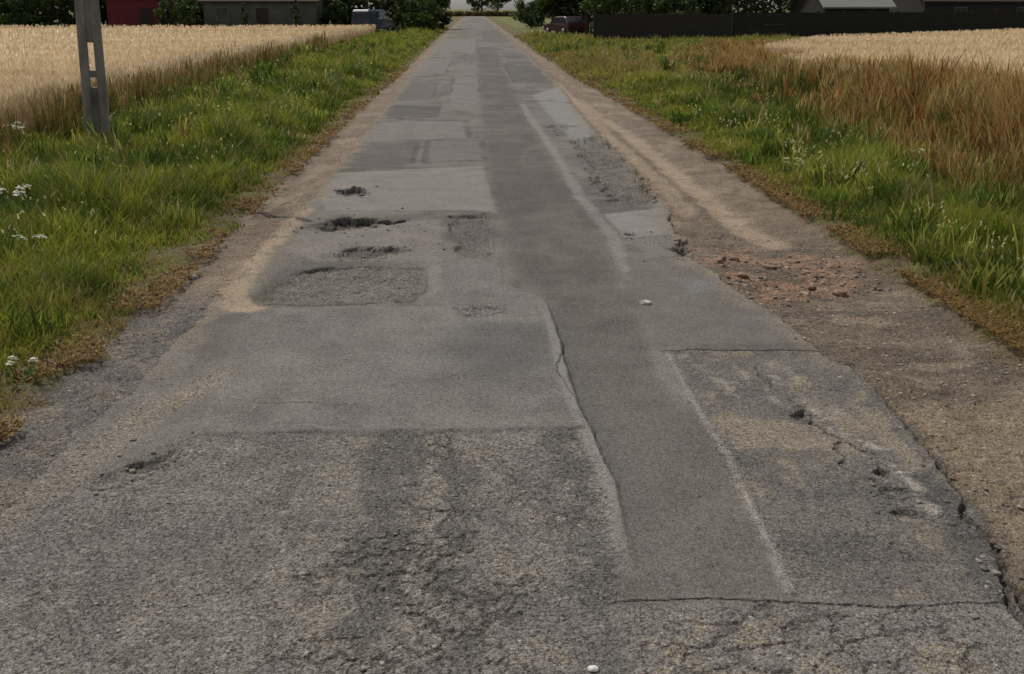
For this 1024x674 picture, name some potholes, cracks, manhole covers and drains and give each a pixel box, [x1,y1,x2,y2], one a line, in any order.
pothole [319,245,420,262]
crack [555,328,614,477]
pothole [665,238,699,258]
pothole [294,215,411,233]
crack [610,349,1024,674]
pothole [883,506,926,518]
pothole [785,407,824,425]
pothole [328,185,374,198]
pothole [870,466,892,480]
